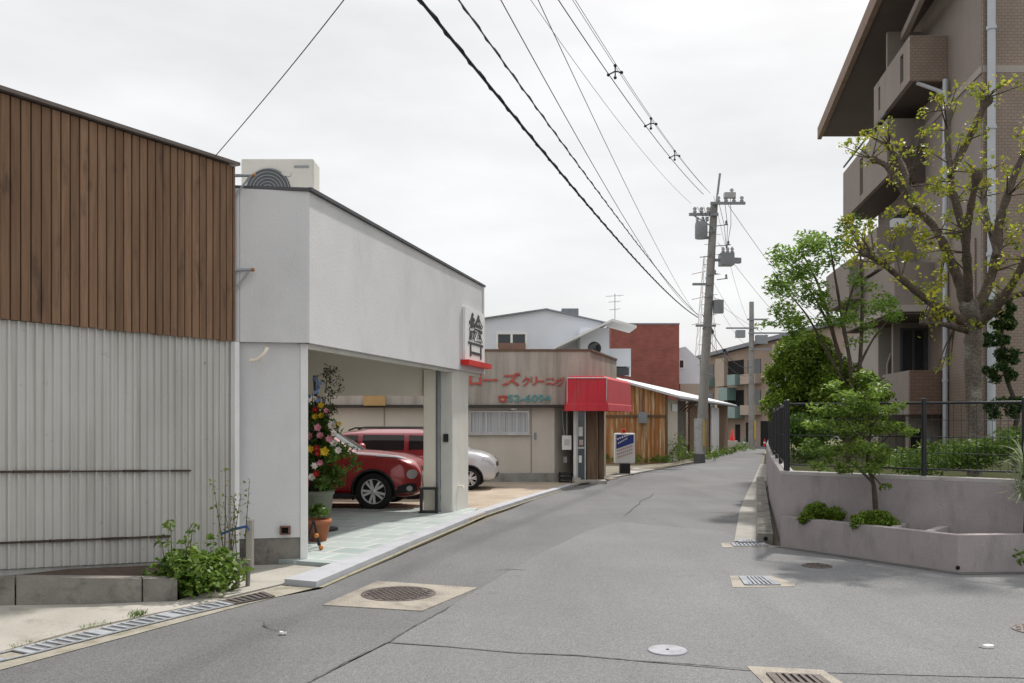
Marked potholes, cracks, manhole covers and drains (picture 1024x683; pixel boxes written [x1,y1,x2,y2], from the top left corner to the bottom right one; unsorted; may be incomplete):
manhole cover [1010,623,1024,633]
manhole cover [648,645,687,656]
manhole cover [323,581,477,612]
drain grate [11,630,109,654]
drain grate [746,666,842,683]
drain grate [162,601,234,617]
drain grate [730,576,796,588]
drain grate [91,613,179,634]
drain grate [220,591,275,605]
